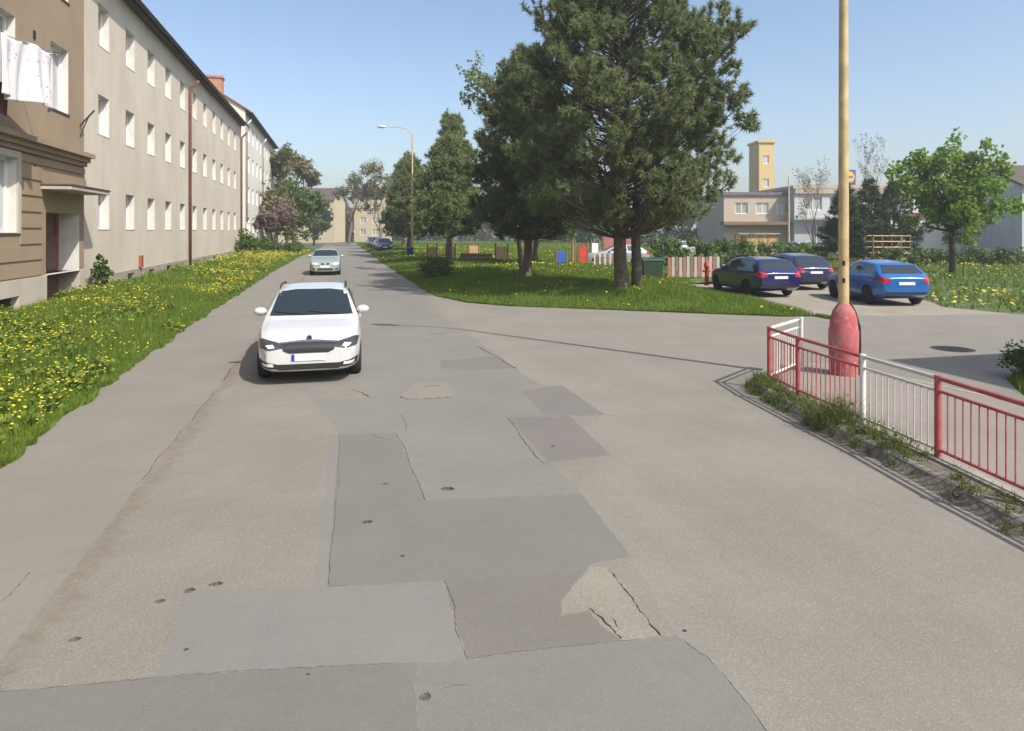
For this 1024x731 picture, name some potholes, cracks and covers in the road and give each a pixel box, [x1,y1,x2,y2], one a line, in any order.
crack [137,360,241,484]
crack [588,569,661,639]
